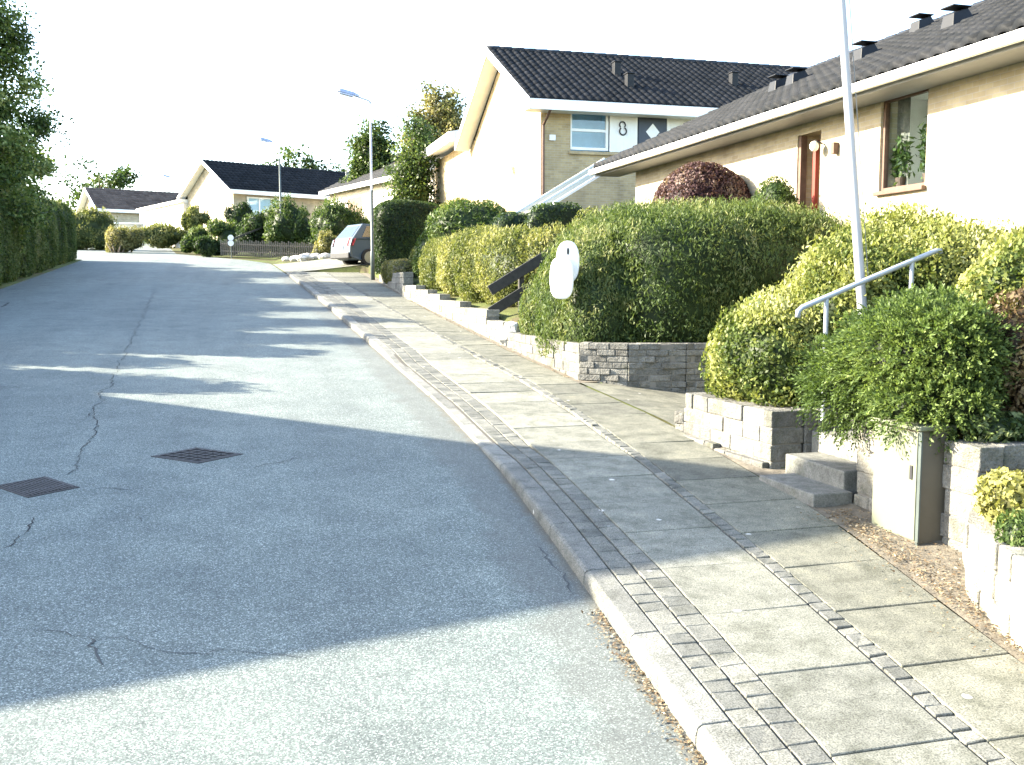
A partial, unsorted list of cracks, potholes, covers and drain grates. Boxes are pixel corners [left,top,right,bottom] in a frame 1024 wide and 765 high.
crack [8,629,309,666]
crack [68,291,154,491]
